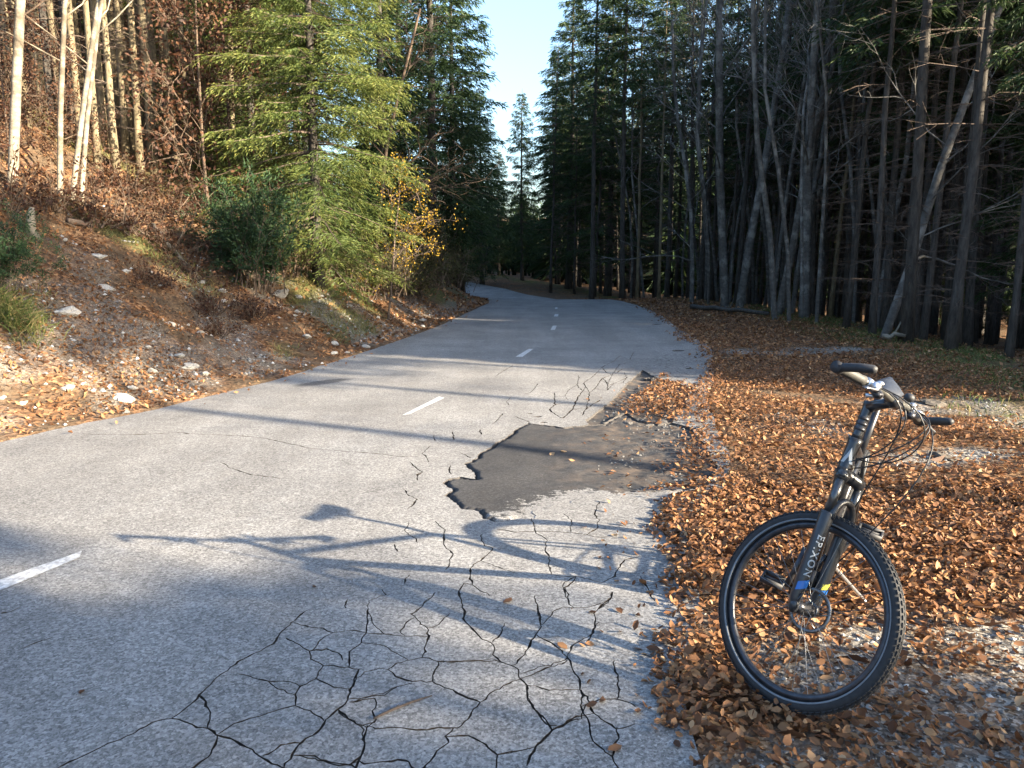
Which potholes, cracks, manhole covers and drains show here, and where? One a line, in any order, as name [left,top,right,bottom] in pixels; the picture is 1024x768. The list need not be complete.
crack [479,352,634,435]
crack [58,502,639,768]
